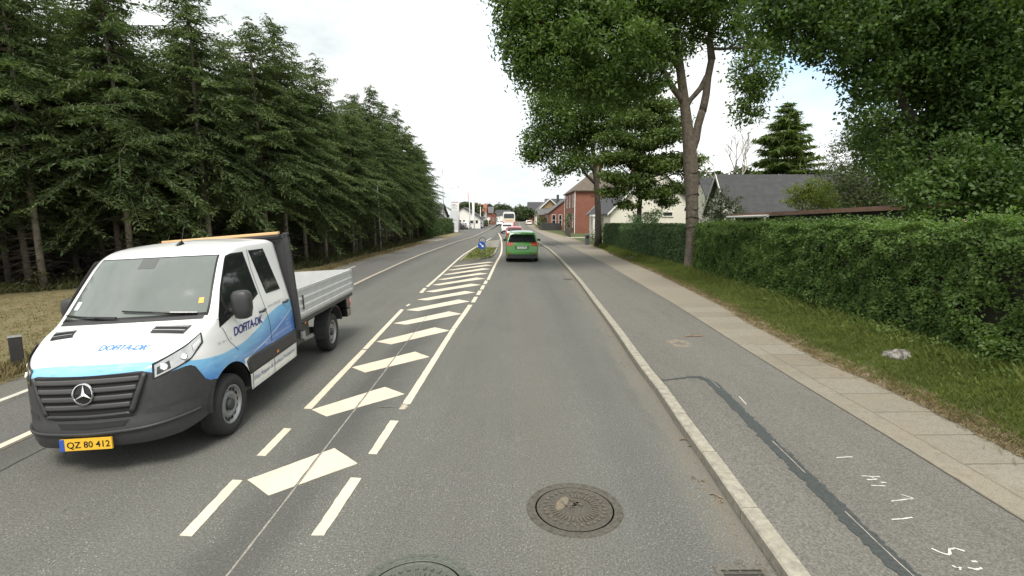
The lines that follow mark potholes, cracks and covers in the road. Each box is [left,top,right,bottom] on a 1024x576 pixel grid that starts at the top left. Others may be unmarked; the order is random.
manhole cover [367,553,471,576]
manhole cover [527,483,623,538]
drain grate [713,560,773,576]
